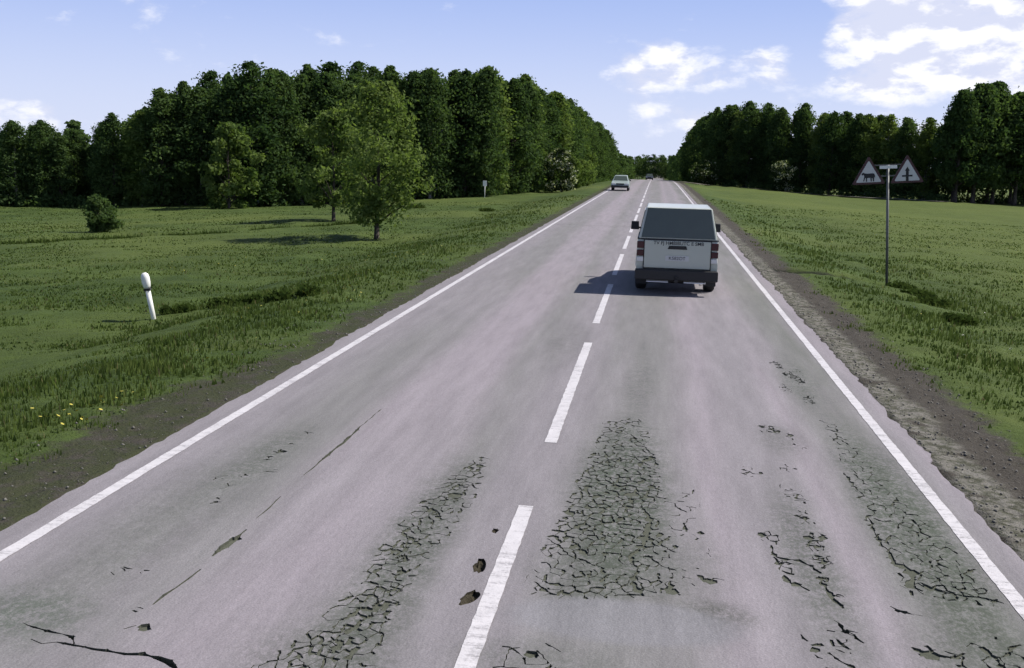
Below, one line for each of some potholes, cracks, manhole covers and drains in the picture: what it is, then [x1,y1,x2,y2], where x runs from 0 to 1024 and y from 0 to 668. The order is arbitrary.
crack [210,432,311,504]
crack [819,420,1004,616]
crack [741,425,864,668]
crack [24,567,177,668]
crack [911,637,1024,668]
crack [493,643,561,668]
crack [251,457,488,668]
pothole [473,559,486,573]
pothole [458,590,480,605]
